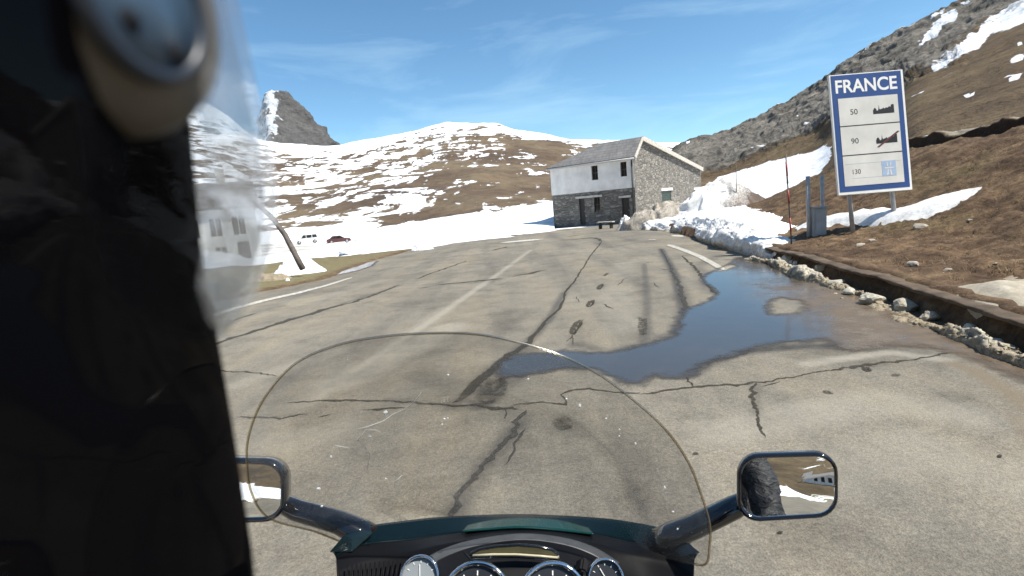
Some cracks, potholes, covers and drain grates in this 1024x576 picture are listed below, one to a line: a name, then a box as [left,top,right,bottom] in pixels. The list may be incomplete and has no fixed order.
crack [241,231,950,466]
